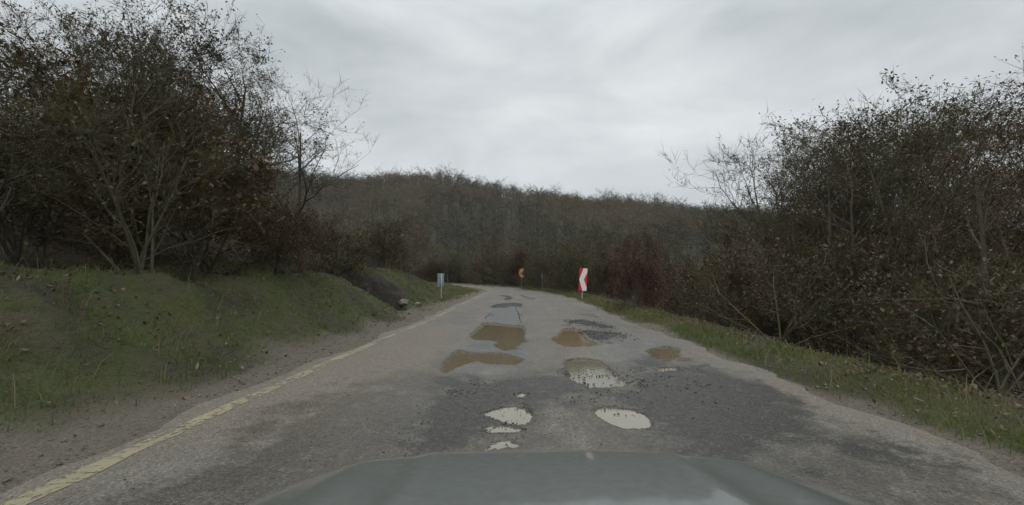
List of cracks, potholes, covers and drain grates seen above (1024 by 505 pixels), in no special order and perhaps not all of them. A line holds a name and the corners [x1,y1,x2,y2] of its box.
pothole [486,440,521,450]
pothole [563,358,628,388]
pothole [440,350,523,373]
pothole [551,328,597,347]
pothole [645,346,681,362]
pothole [476,404,537,425]
